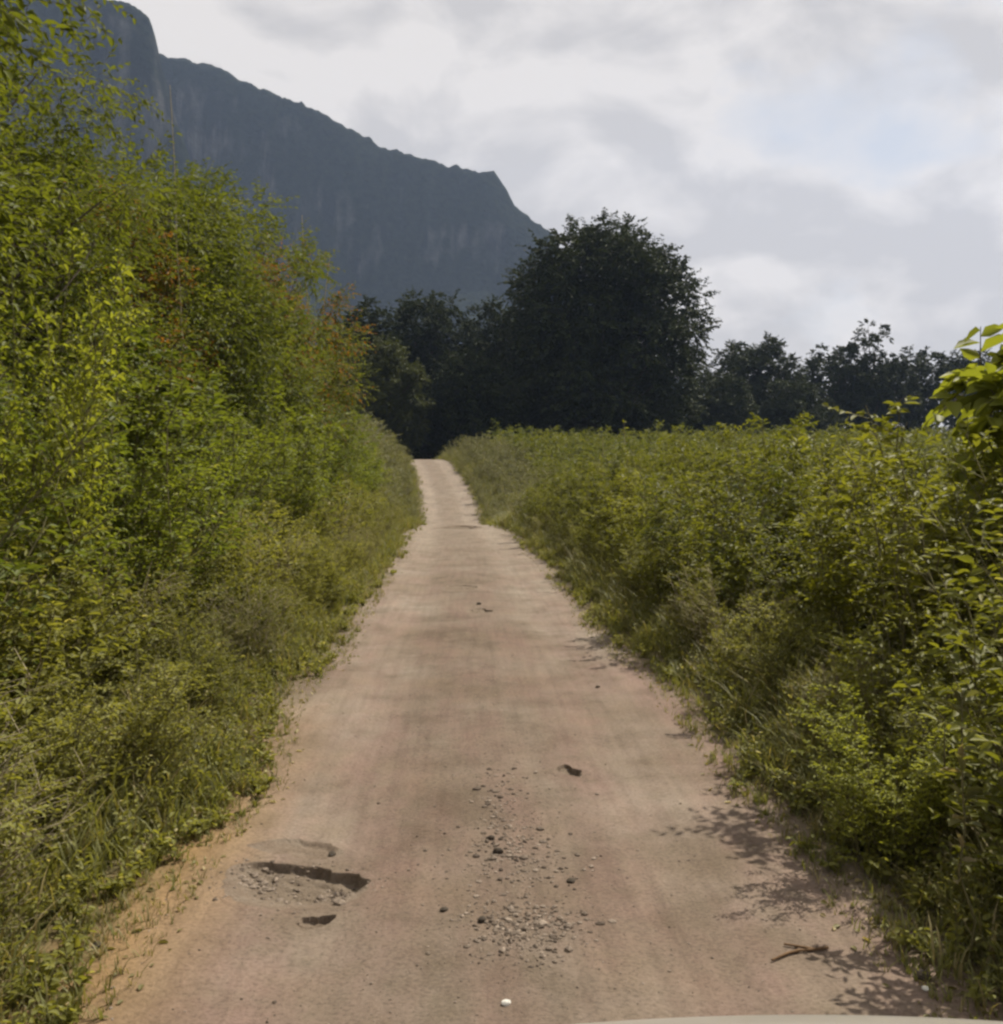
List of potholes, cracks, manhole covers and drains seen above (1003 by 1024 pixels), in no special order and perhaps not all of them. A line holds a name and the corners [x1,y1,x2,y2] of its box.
pothole [210,859,382,916]
pothole [232,834,360,869]
pothole [279,911,348,937]
